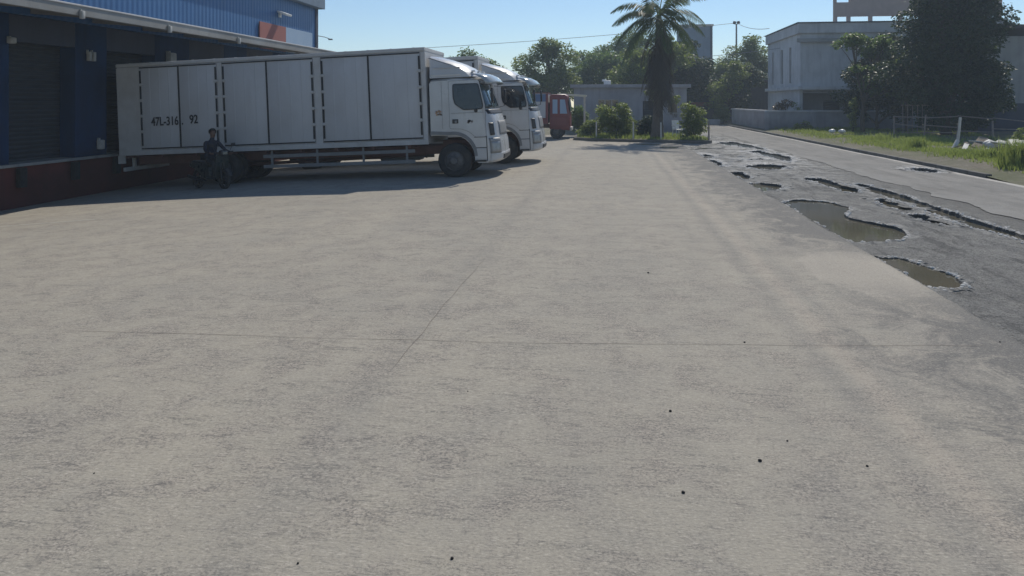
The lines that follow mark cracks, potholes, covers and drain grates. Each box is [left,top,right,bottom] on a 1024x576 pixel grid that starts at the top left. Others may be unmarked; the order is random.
pothole [891,165,952,174]
pothole [735,149,801,163]
pothole [872,254,974,294]
pothole [839,182,1024,244]
pothole [707,158,734,167]
pothole [731,161,797,170]
pothole [779,197,923,246]
pothole [726,169,767,180]
pothole [712,140,776,151]
pothole [745,180,795,192]
pothole [789,175,870,194]
